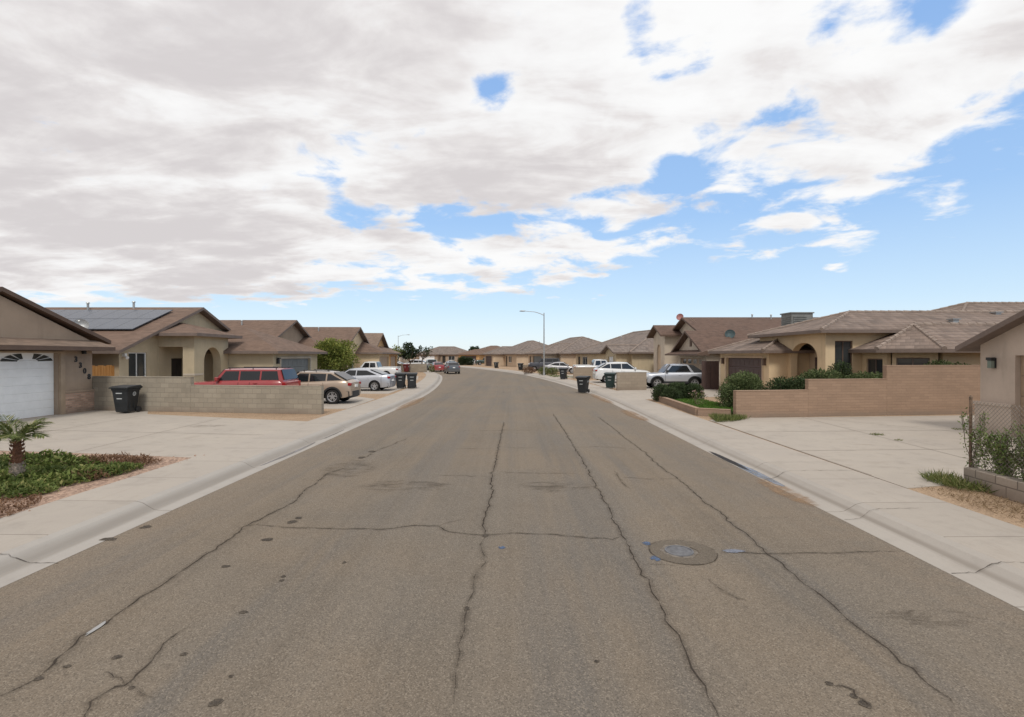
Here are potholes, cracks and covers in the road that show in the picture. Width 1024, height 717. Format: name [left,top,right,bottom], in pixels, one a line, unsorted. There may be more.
crack [84,631,180,716]
crack [603,420,954,704]
crack [0,422,615,696]
manhole cover [649,540,718,565]
crack [553,414,719,716]
